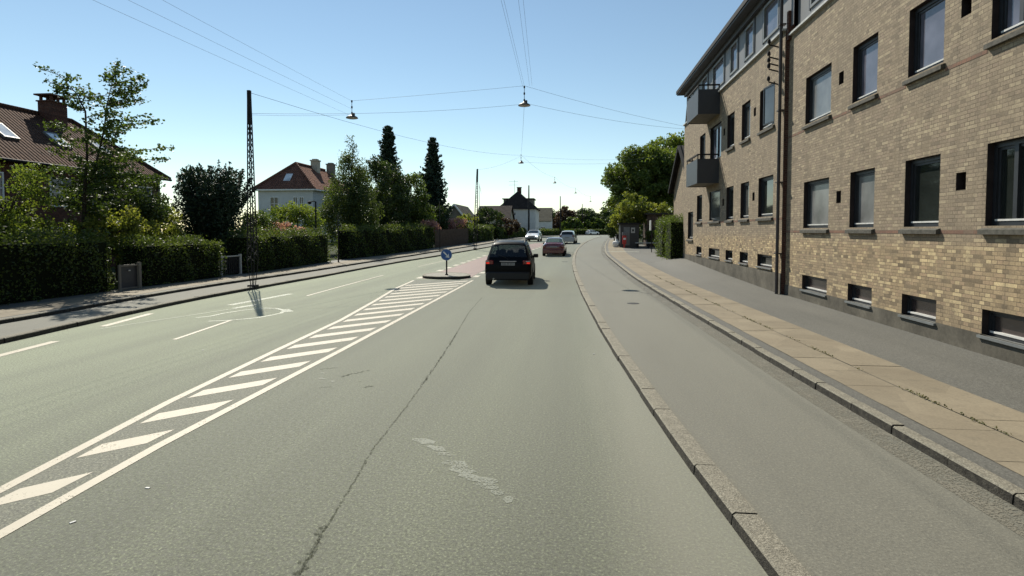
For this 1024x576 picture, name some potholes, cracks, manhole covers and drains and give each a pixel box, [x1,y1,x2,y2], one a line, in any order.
crack [293,333,457,575]
